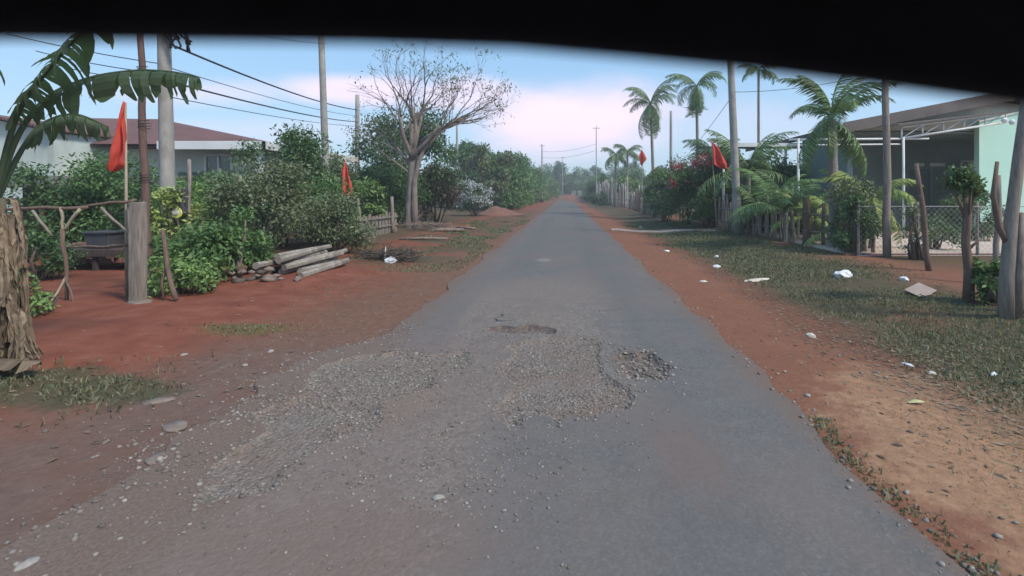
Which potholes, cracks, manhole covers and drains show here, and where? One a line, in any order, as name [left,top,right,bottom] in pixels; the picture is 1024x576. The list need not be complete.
pothole [488,325,557,334]
pothole [196,351,472,503]
pothole [493,337,635,427]
pothole [612,349,674,380]
